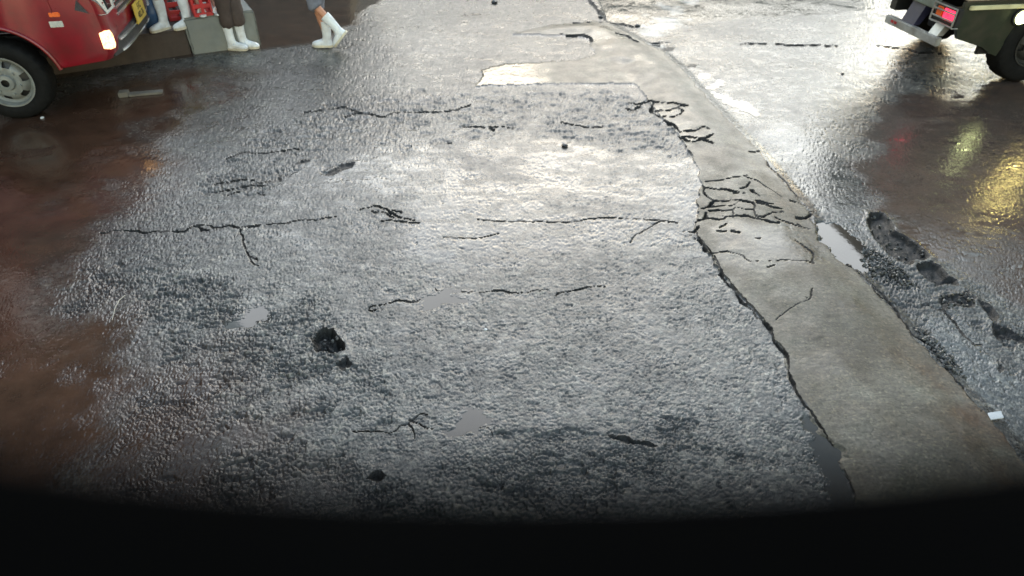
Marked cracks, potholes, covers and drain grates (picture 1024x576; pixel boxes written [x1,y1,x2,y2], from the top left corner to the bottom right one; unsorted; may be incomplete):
crack [369,285,606,312]
crack [100,216,337,266]
pothole [916,260,959,286]
crack [740,42,942,55]
pothole [939,291,977,309]
crack [776,288,813,320]
pothole [867,211,931,265]
crack [304,104,515,132]
pothole [978,299,999,322]
crack [443,149,815,268]
crack [351,413,493,439]
